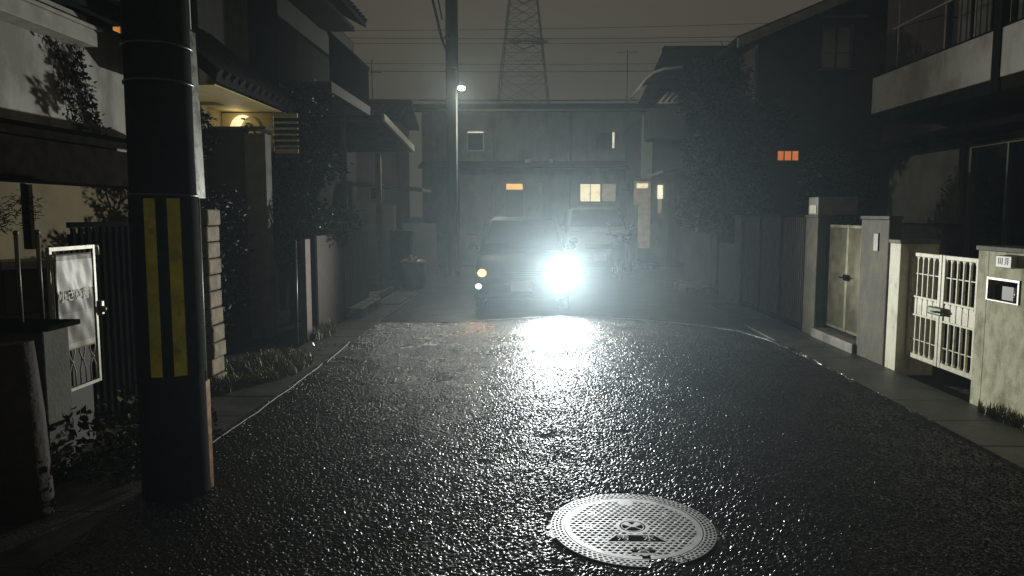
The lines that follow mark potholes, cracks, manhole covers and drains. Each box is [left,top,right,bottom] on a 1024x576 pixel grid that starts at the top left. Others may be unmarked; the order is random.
manhole cover [550,494,717,568]
